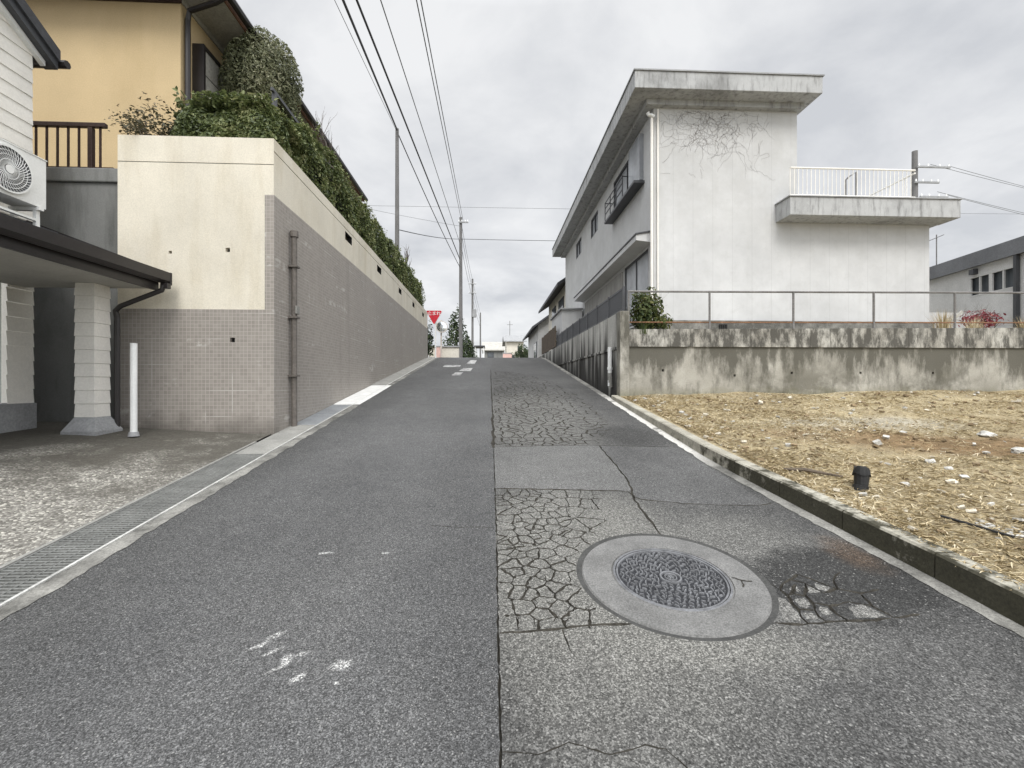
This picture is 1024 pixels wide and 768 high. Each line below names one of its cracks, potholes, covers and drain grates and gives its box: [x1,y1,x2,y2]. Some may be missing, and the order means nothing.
crack [431,372,771,659]
drain grate [55,487,205,544]
manhole cover [576,533,779,641]
drain grate [168,454,264,487]
drain grate [0,543,107,604]
crack [503,742,688,768]
